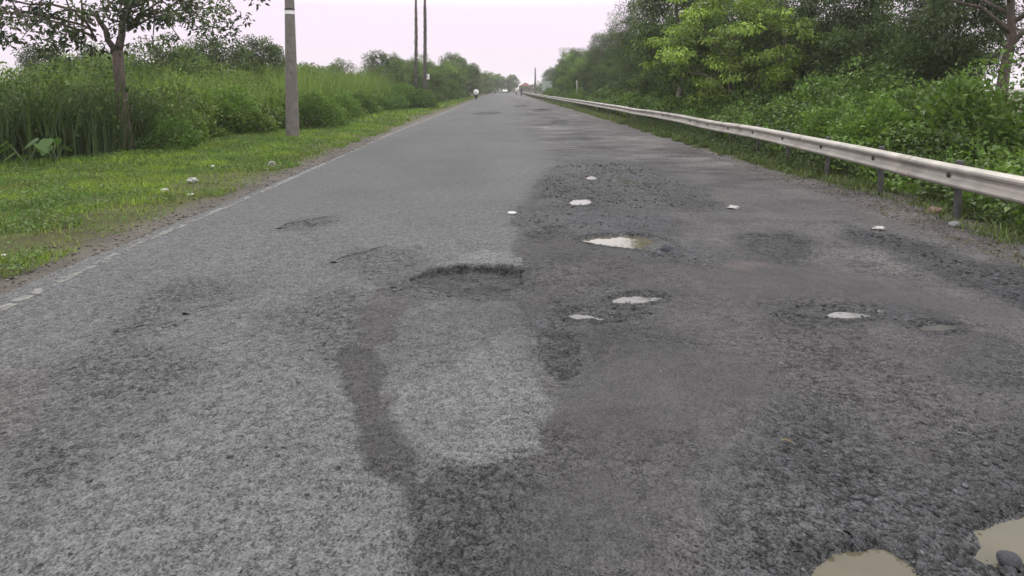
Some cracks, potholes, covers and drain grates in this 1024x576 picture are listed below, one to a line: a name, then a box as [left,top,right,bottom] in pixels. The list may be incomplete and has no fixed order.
pothole [568,231,681,255]
pothole [526,321,596,388]
pothole [777,300,895,323]
pothole [402,262,533,300]
crack [331,246,387,263]
pothole [901,318,973,335]
pothole [739,232,822,263]
pothole [599,288,677,307]
